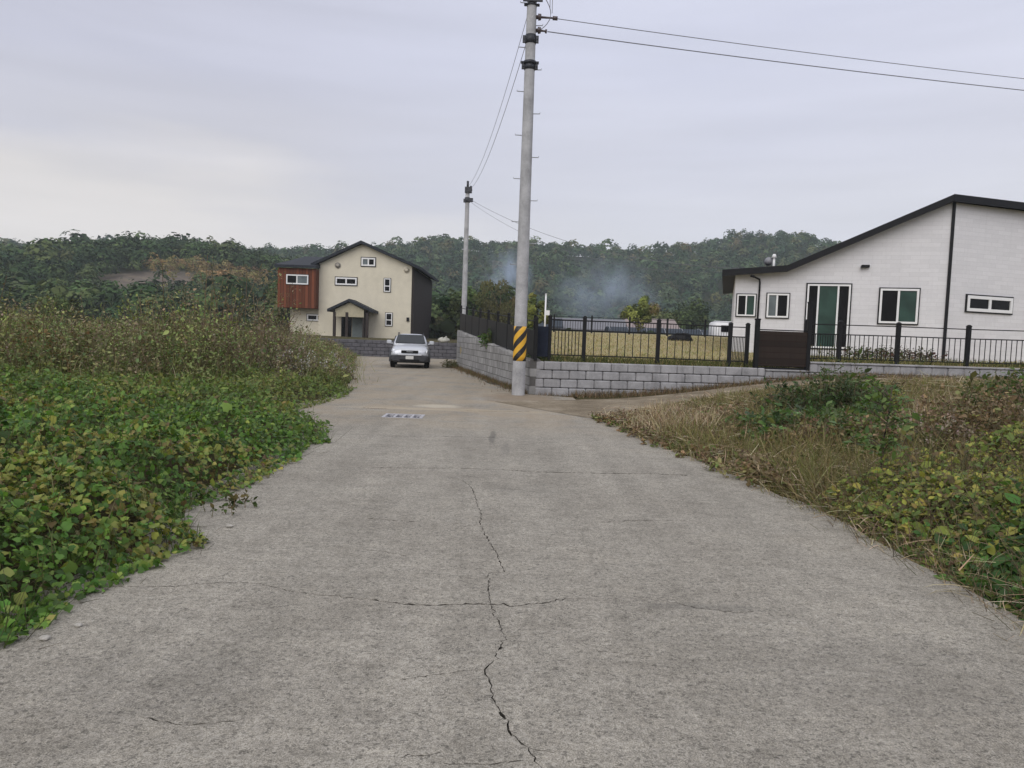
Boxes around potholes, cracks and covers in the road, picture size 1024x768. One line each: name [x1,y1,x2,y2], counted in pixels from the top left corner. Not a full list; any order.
crack [111,479,564,767]
